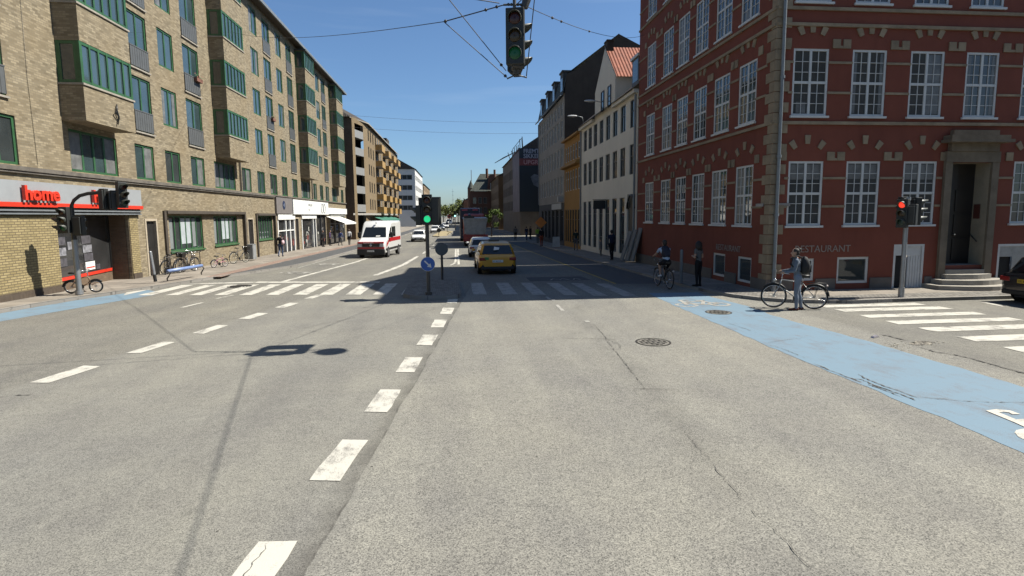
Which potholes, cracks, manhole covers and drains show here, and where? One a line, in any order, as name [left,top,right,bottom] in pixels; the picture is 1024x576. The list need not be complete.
crack [820,365,982,402]
crack [563,327,679,390]
crack [880,334,1024,373]
manhole cover [635,338,671,346]
crack [687,434,807,564]
